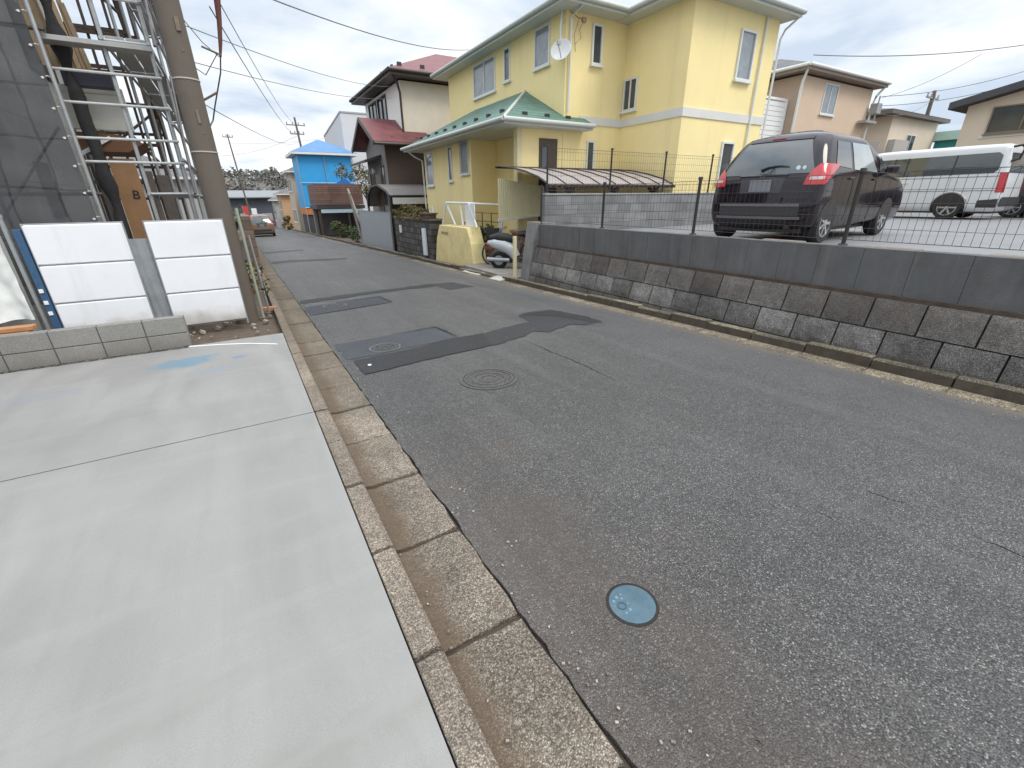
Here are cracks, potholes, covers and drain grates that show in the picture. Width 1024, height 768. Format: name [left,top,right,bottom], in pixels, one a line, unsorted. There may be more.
utility cover [606,583,659,627]
manhole cover [369,343,401,352]
manhole cover [459,368,518,390]
